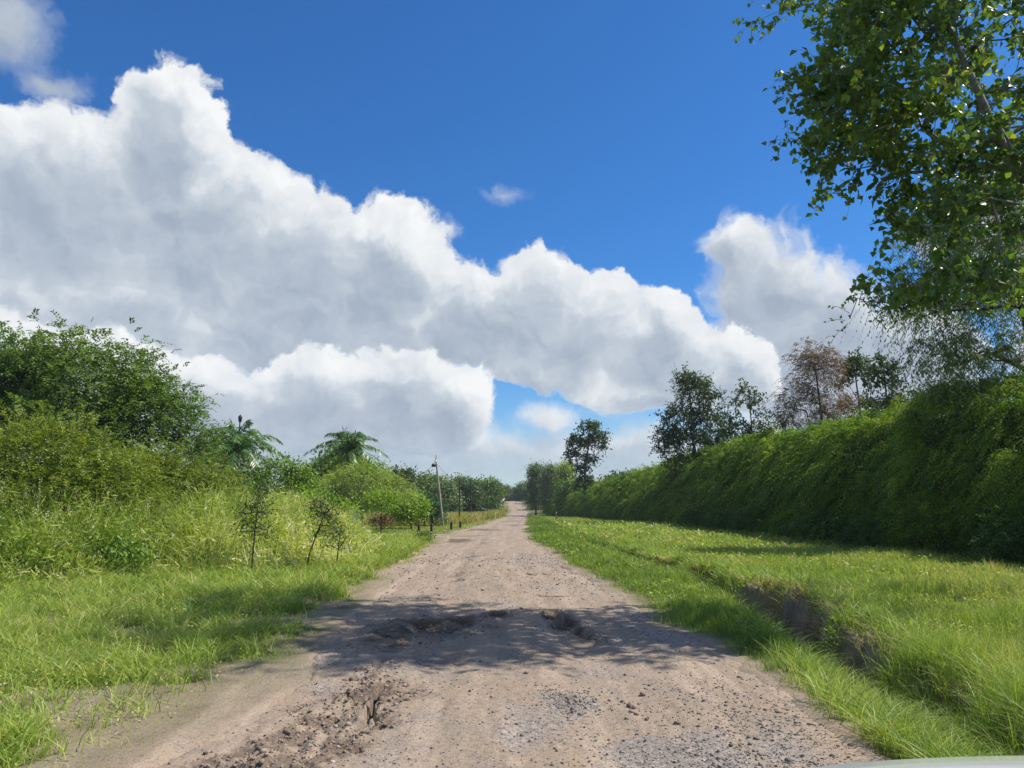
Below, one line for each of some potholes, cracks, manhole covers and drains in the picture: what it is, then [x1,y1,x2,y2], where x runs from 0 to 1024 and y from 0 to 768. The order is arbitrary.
pothole [540,609,608,643]
pothole [353,614,498,648]
